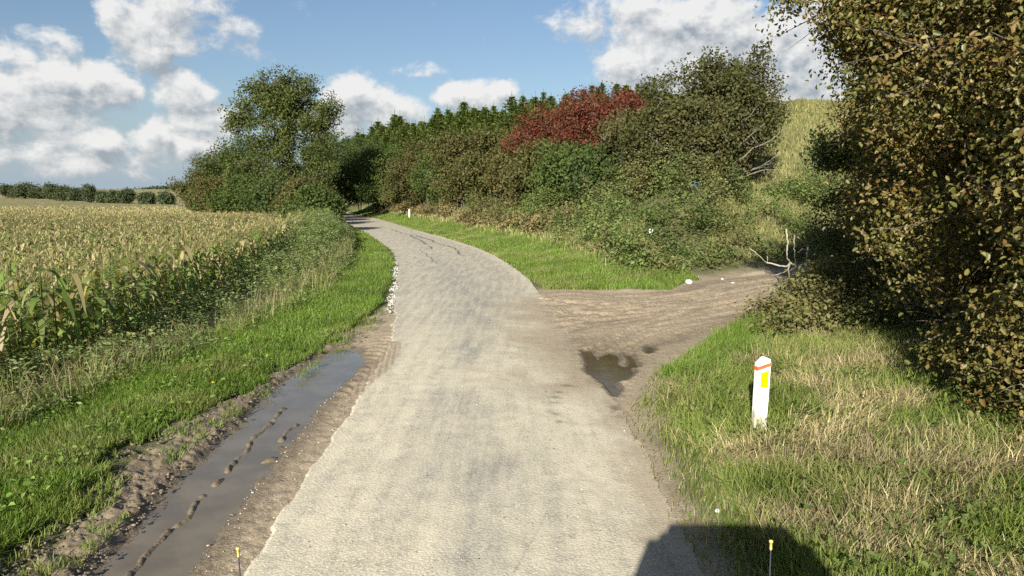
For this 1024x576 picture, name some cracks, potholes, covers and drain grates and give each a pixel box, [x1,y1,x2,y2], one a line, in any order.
pothole [578,347,645,398]
crack [391,229,465,263]
